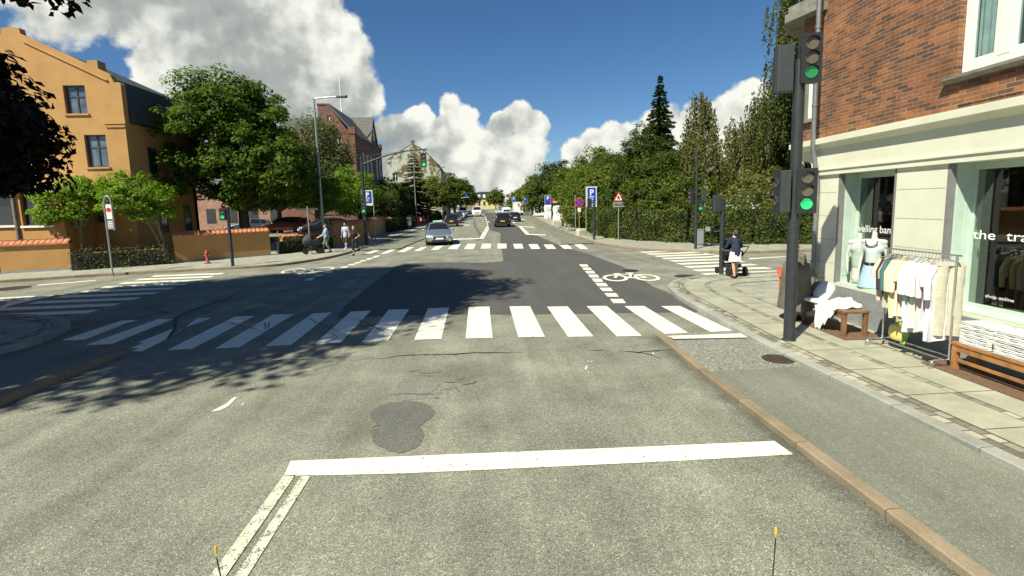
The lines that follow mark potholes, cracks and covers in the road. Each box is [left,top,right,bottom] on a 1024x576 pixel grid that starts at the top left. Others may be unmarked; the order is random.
crack [273,352,510,427]
manhole cover [762,354,795,364]
